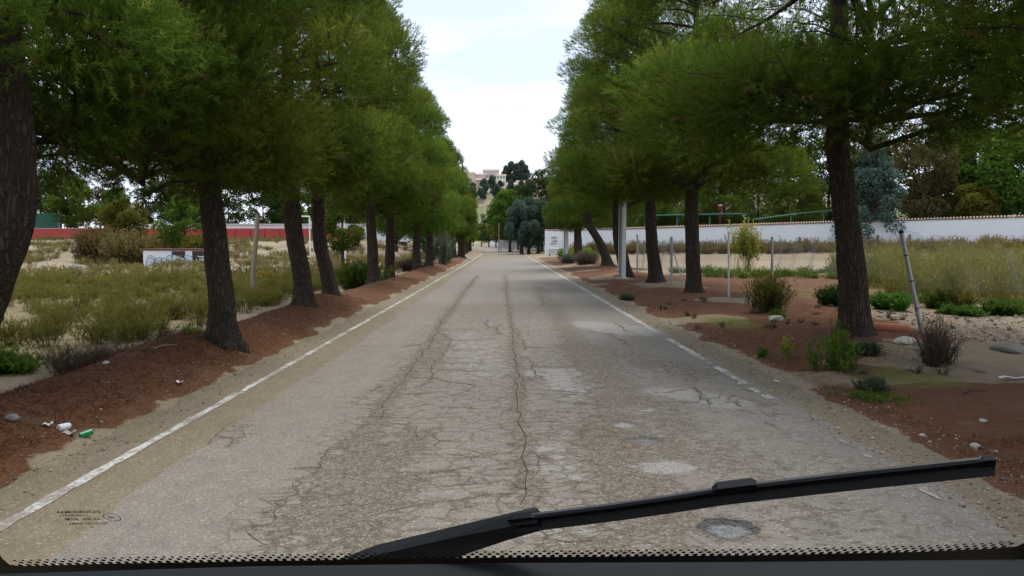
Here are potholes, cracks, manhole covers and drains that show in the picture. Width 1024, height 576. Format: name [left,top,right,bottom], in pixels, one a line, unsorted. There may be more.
pothole [695,518,762,540]
crack [246,447,342,545]
crack [362,275,589,518]
